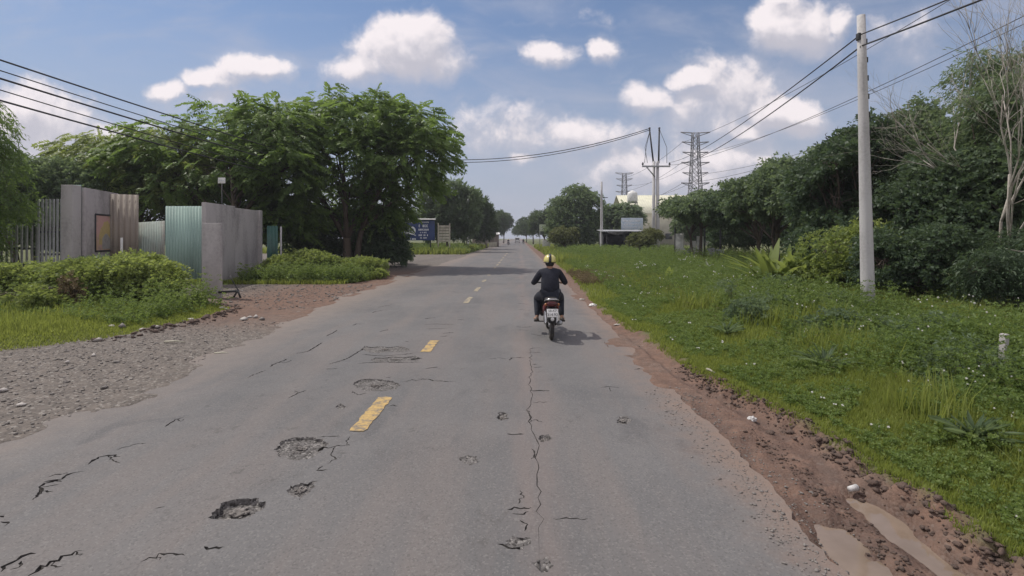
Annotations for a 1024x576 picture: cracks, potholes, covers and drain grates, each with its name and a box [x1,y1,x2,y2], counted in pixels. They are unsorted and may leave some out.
pothole [274,437,330,460]
pothole [208,498,266,521]
pothole [286,481,317,500]
pothole [505,536,531,550]
crack [316,436,350,471]
crack [33,443,145,499]
pothole [353,379,400,391]
pothole [459,455,480,466]
crack [141,553,185,562]
crack [1,550,82,576]
pothole [531,557,554,573]
crack [490,330,585,549]
